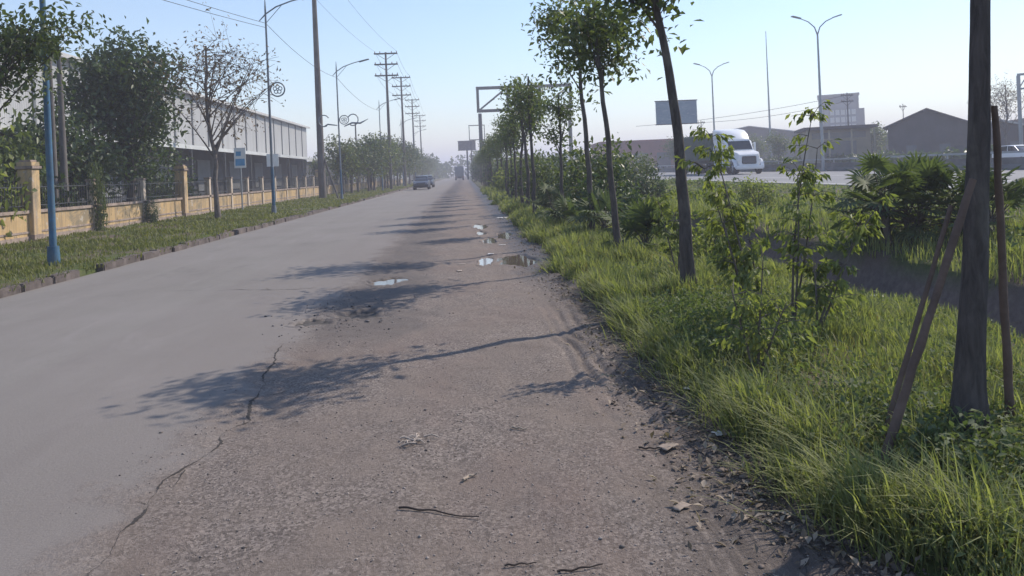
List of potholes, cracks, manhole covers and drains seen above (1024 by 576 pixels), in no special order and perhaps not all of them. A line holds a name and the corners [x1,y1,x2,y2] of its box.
pothole [491,253,544,269]
pothole [479,237,499,245]
crack [88,346,282,576]
pothole [367,276,414,287]
pothole [495,230,515,241]
pothole [476,255,503,267]
pothole [326,306,386,321]
